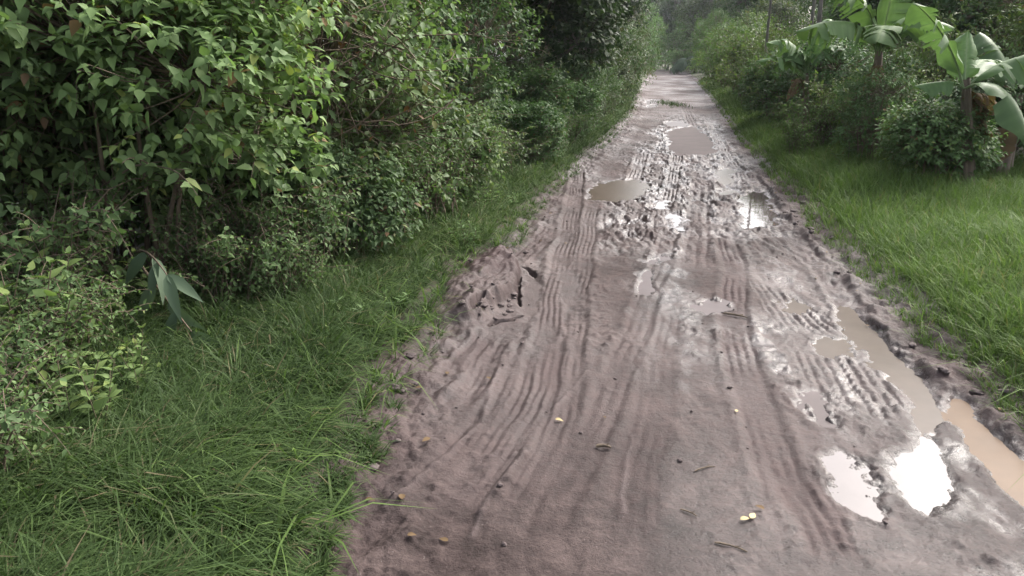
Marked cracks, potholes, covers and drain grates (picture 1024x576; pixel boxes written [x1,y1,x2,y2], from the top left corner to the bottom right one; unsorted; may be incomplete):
pothole [876,432,964,517]
pothole [663,126,720,156]
pothole [816,445,896,523]
pothole [729,186,790,229]
pothole [832,305,945,440]
pothole [585,177,650,203]
pothole [809,334,863,360]
